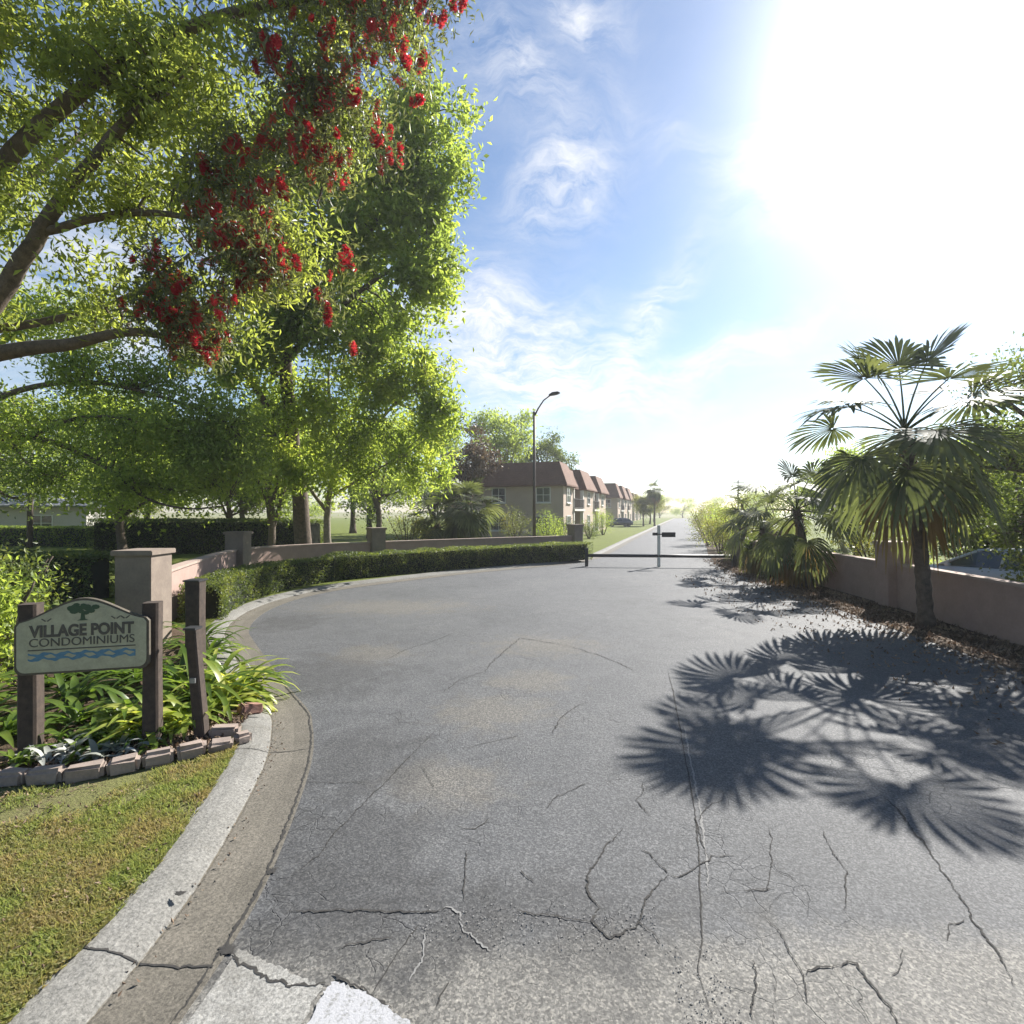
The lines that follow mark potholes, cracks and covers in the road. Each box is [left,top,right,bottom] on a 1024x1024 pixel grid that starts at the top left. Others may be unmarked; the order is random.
crack [887,799,1013,984]
crack [83,681,491,1024]
crack [823,832,848,909]
crack [443,638,551,693]
crack [750,912,903,1024]
